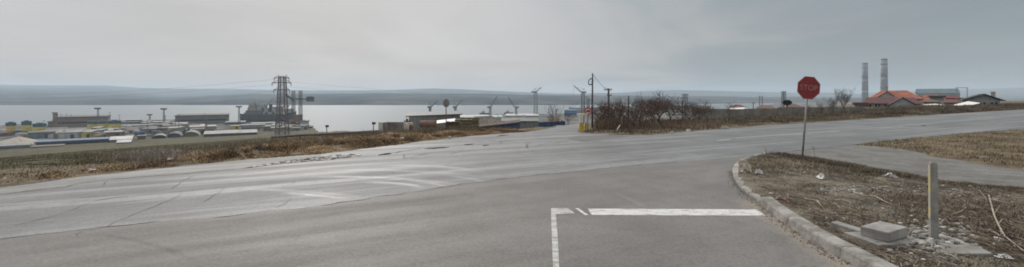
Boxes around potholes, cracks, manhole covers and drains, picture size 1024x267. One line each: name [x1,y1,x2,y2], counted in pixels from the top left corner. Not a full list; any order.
crack [6,154,376,224]
